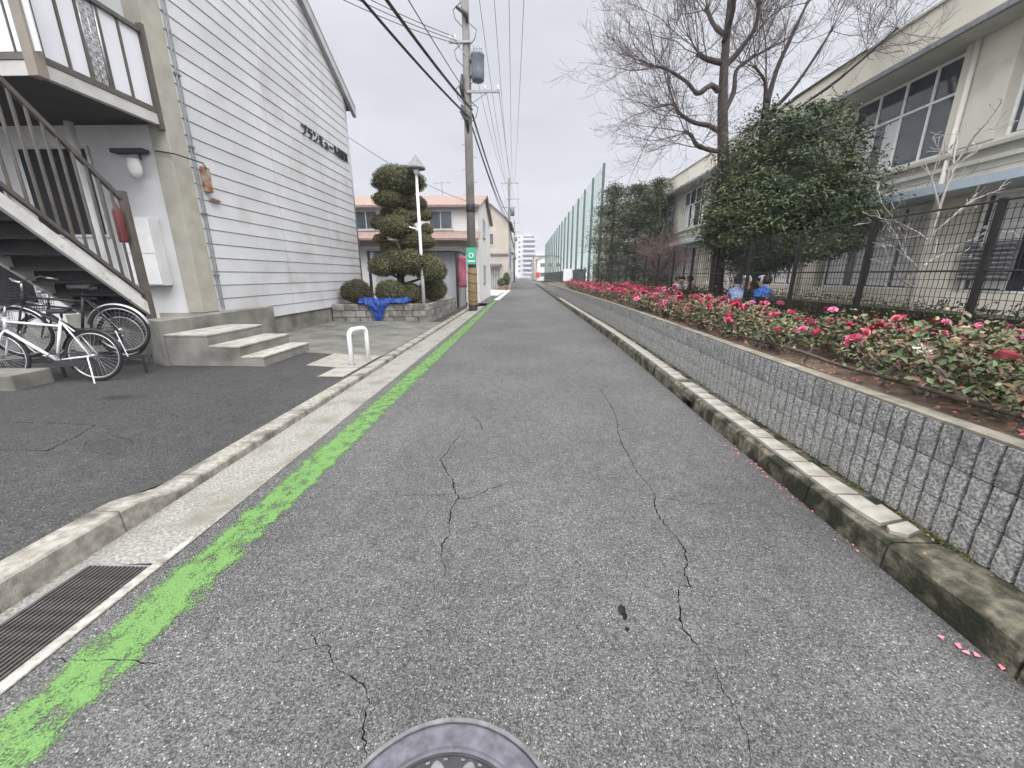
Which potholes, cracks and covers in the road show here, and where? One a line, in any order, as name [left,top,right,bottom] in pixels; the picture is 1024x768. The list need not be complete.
crack [601,390,753,768]
crack [257,629,370,759]
drain grate [0,564,154,696]
crack [396,436,504,575]
